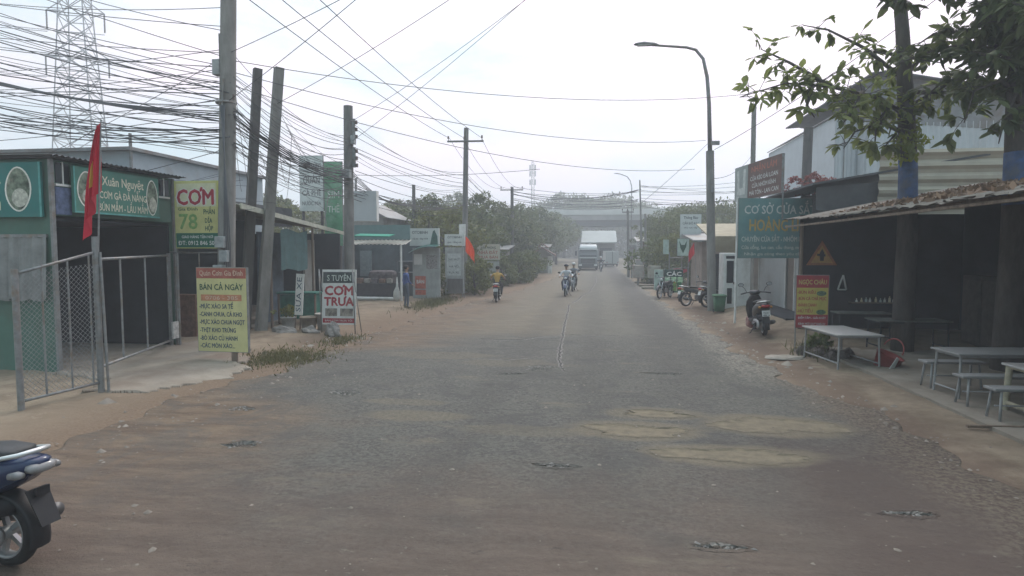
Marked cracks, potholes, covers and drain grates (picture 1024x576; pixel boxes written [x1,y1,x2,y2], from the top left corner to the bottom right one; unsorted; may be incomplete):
pothole [689,539,757,553]
pothole [217,439,262,449]
crack [459,276,597,371]
pothole [876,508,941,519]
